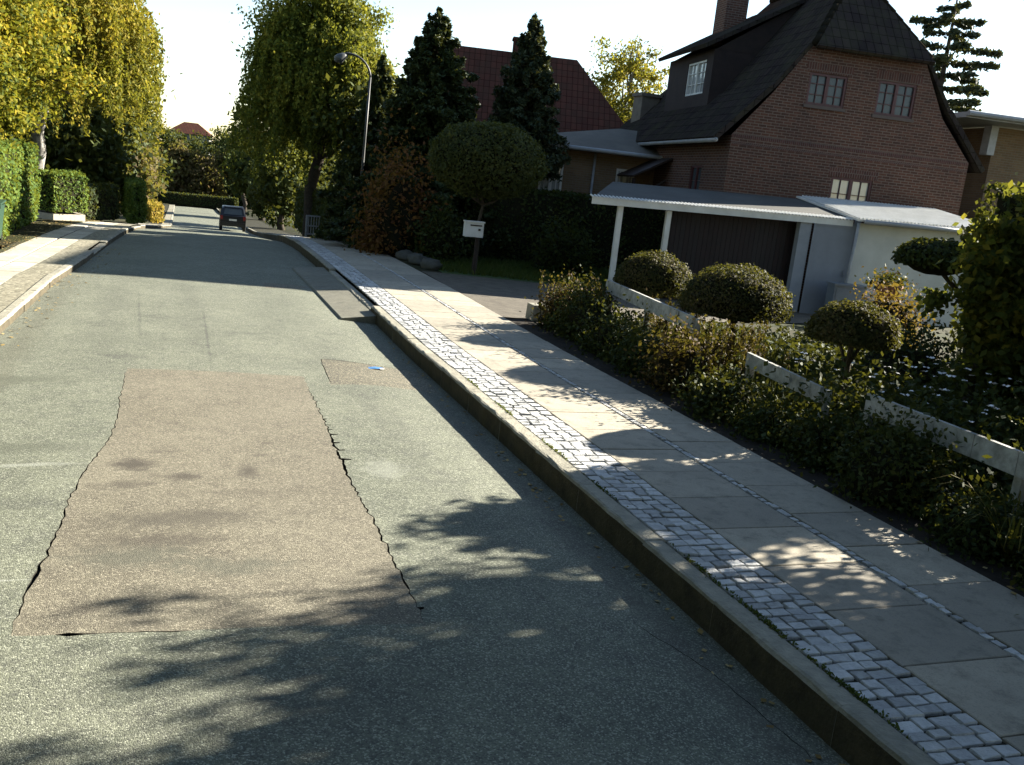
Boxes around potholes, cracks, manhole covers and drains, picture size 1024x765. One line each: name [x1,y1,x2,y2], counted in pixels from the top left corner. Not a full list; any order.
crack [308,389,424,620]
crack [11,372,181,636]
